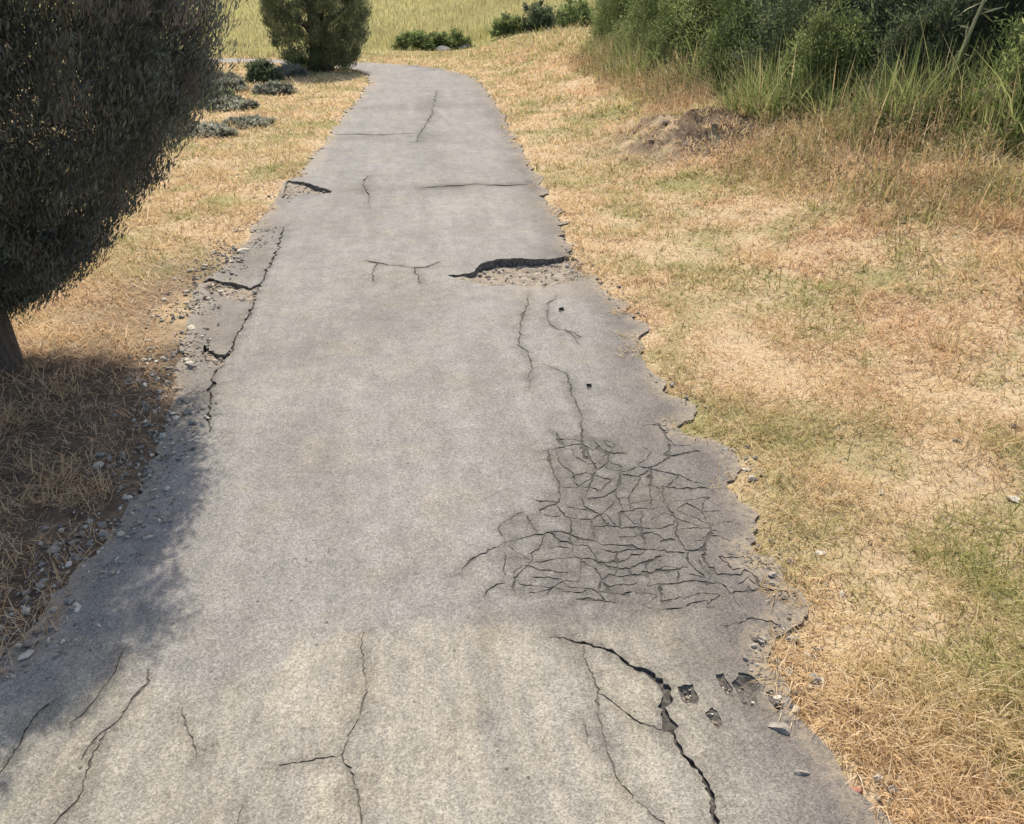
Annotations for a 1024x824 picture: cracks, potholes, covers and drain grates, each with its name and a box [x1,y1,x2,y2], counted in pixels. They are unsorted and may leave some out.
crack [278,632,368,824]
crack [338,92,437,142]
pothole [282,180,332,198]
crack [181,707,197,758]
crack [0,647,150,824]
crack [549,636,720,824]
crack [365,260,439,283]
crack [459,291,787,626]
crack [206,229,285,432]
pothole [447,256,581,288]
